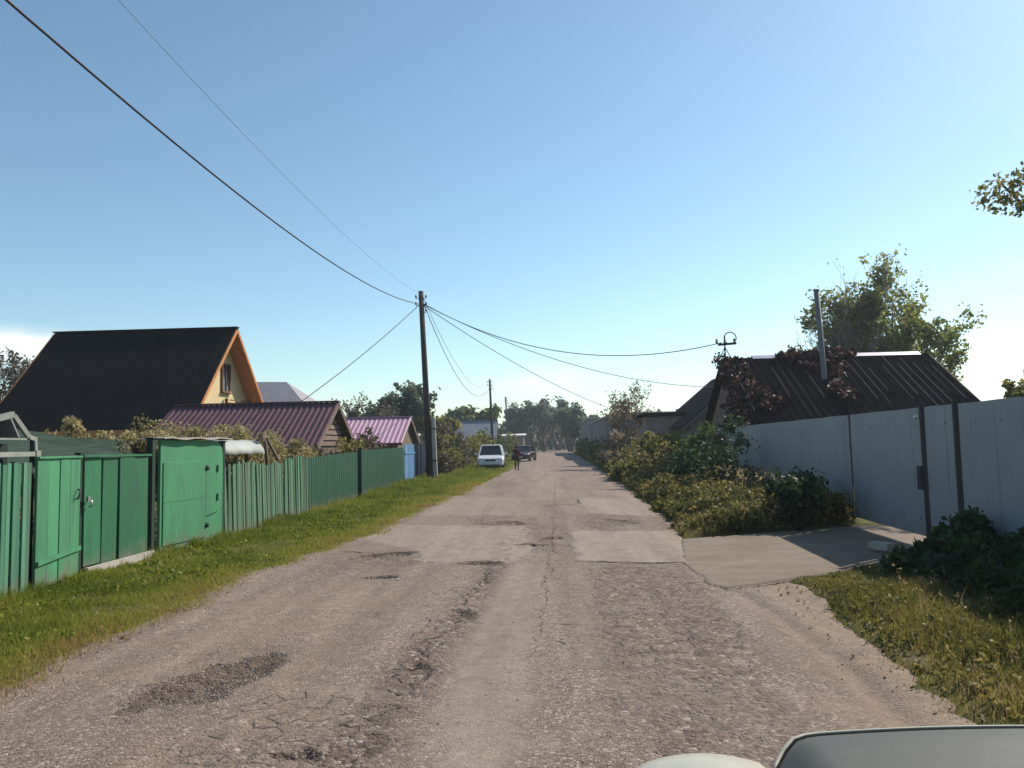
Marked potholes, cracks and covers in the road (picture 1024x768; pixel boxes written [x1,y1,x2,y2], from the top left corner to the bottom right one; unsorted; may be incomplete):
pothole [442,609,476,621]
crack [179,560,498,768]
pothole [111,652,287,716]
